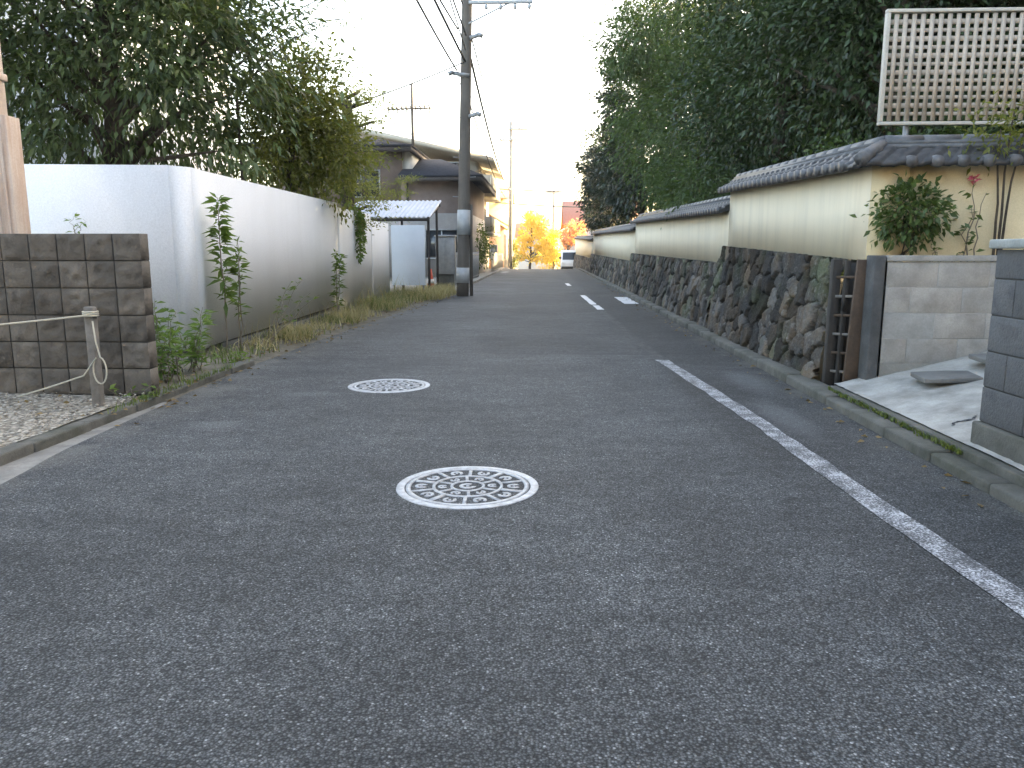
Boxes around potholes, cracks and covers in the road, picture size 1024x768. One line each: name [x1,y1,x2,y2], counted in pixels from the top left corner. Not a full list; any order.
manhole cover [348,379,430,393]
manhole cover [396,466,539,510]
